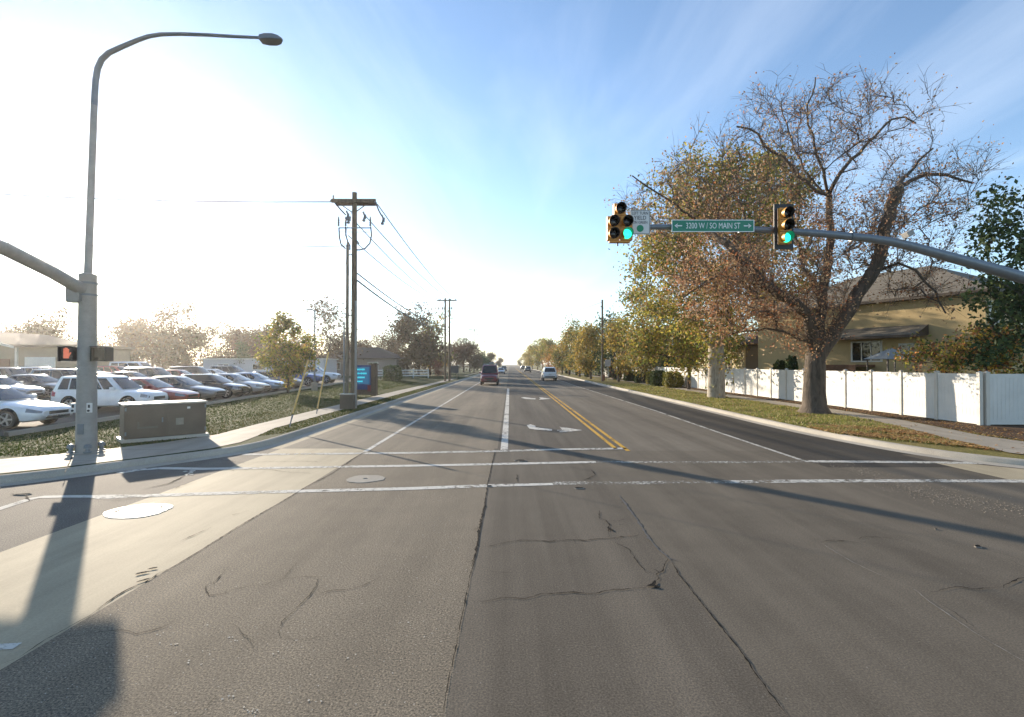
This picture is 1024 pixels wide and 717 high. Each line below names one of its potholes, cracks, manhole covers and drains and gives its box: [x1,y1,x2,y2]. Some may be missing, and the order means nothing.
crack [468,501,665,601]
manhole cover [102,503,174,519]
crack [937,558,1024,630]
crack [205,564,379,640]
manhole cover [346,475,385,483]
